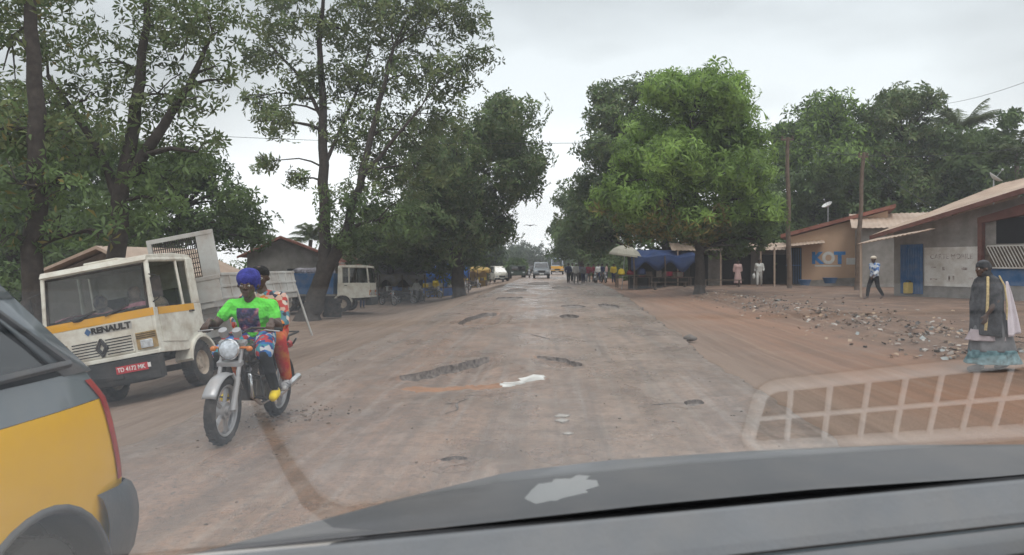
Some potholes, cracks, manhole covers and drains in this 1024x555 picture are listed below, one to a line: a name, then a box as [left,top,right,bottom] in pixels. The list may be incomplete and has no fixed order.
pothole [453,312,517,330]
pothole [671,398,717,409]
pothole [366,356,560,398]
pothole [525,355,592,371]
